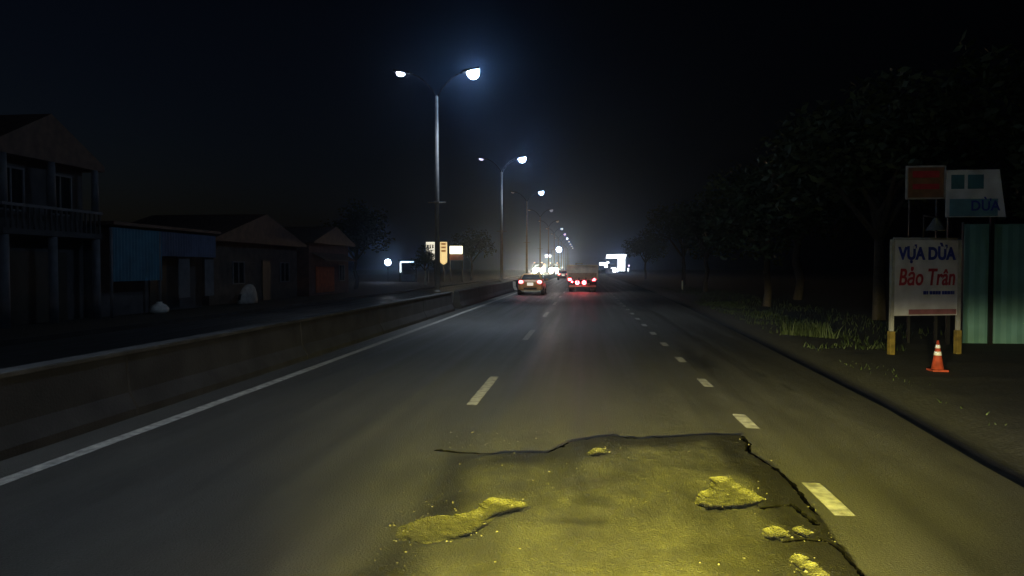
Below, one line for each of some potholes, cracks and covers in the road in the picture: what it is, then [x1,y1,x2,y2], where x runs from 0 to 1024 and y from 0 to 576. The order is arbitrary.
pothole [587,448,608,457]
crack [434,436,865,576]
pothole [789,554,830,576]
pothole [761,526,791,541]
pothole [694,476,766,511]
pothole [792,526,811,538]
pothole [395,497,528,544]
